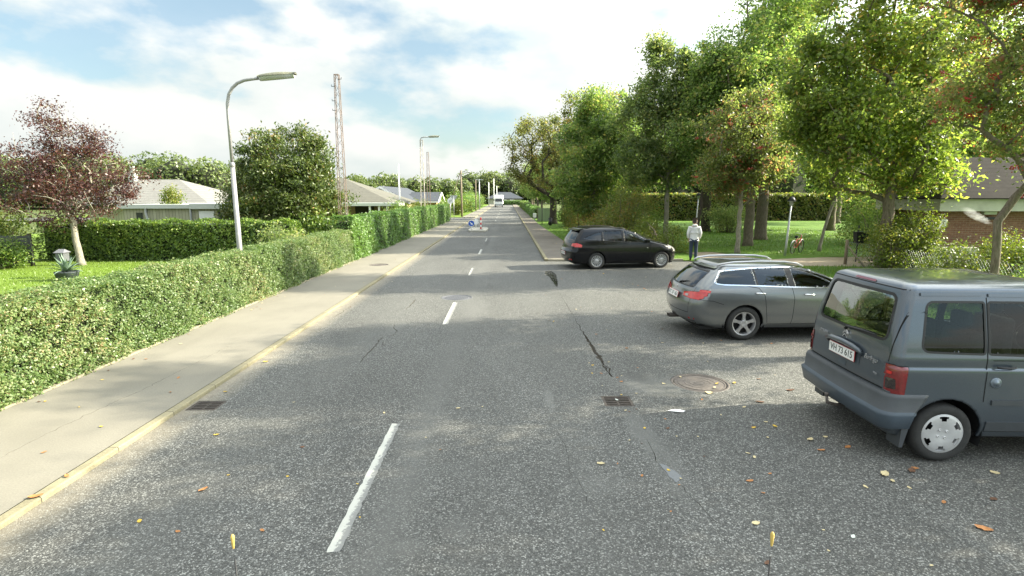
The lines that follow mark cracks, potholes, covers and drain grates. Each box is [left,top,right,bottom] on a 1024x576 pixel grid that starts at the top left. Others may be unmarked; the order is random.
crack [575,319,612,377]
drain grate [185,401,227,411]
drain grate [601,396,635,406]
manhole cover [670,374,730,392]
